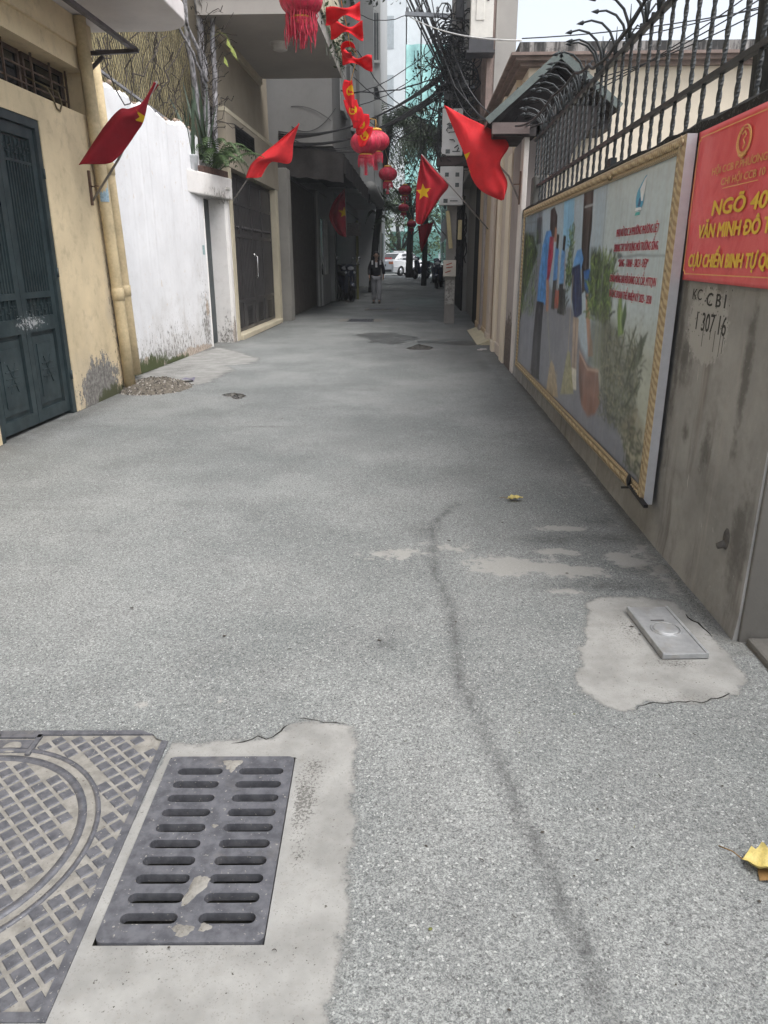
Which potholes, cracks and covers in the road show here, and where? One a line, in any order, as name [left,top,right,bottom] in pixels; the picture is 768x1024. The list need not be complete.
crack [237,718,337,743]
crack [638,693,733,707]
manhole cover [0,729,174,1024]
drain grate [92,756,296,946]
